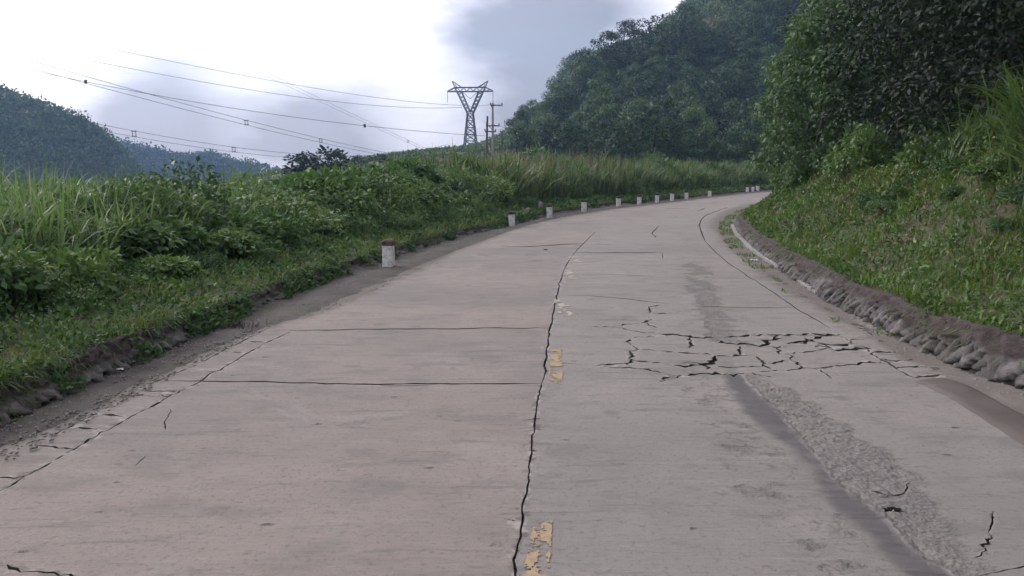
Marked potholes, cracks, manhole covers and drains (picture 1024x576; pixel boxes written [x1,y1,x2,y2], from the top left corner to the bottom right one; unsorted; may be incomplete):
crack [596,305,941,382]
crack [0,564,74,576]
crack [976,511,1024,576]
crack [0,329,285,491]
